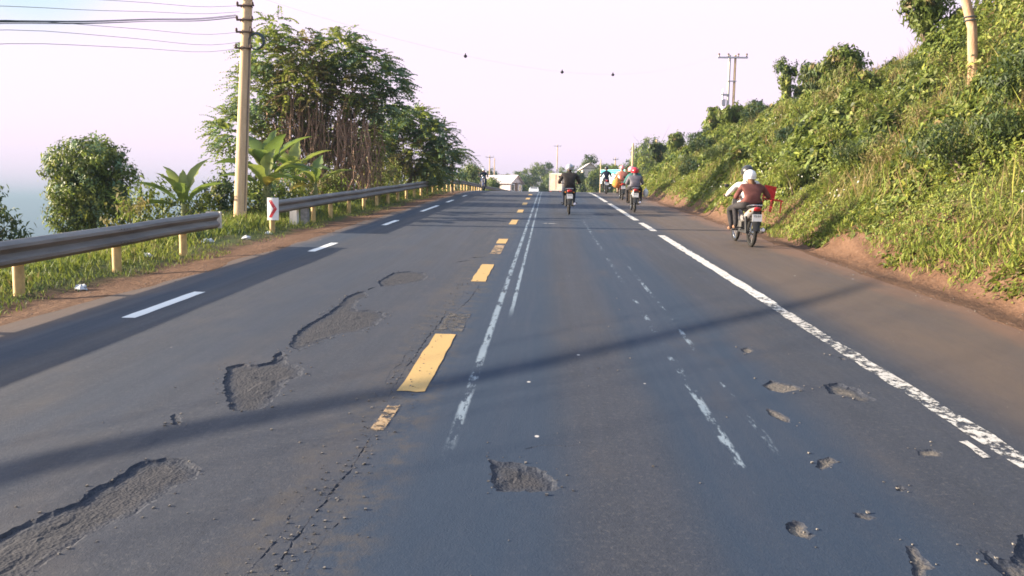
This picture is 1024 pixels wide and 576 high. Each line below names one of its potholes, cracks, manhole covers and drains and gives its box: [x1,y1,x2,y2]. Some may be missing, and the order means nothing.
pothole [916,449,943,457]
pothole [378,271,428,286]
pothole [905,546,936,576]
pothole [766,408,790,423]
pothole [815,457,838,470]
pothole [785,520,816,540]
pothole [222,351,305,411]
pothole [824,382,877,402]
crack [246,284,480,576]
pothole [978,534,1024,576]
pothole [488,459,560,493]
pothole [288,291,386,350]
